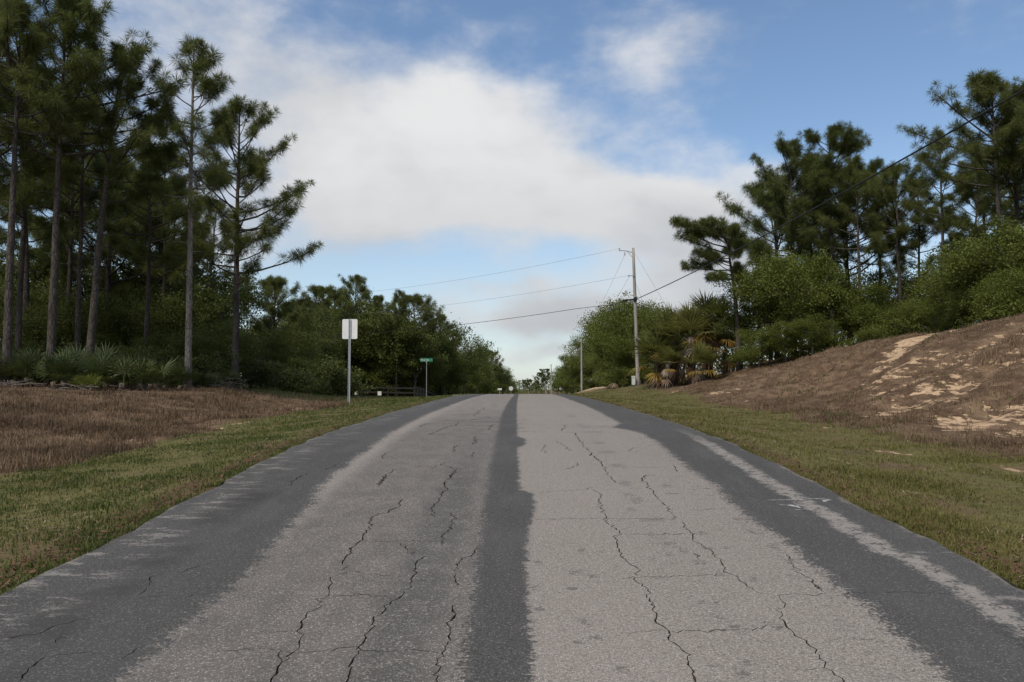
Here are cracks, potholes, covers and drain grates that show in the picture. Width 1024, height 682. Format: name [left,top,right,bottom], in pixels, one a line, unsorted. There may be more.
crack [228,409,495,682]
crack [526,425,943,682]
